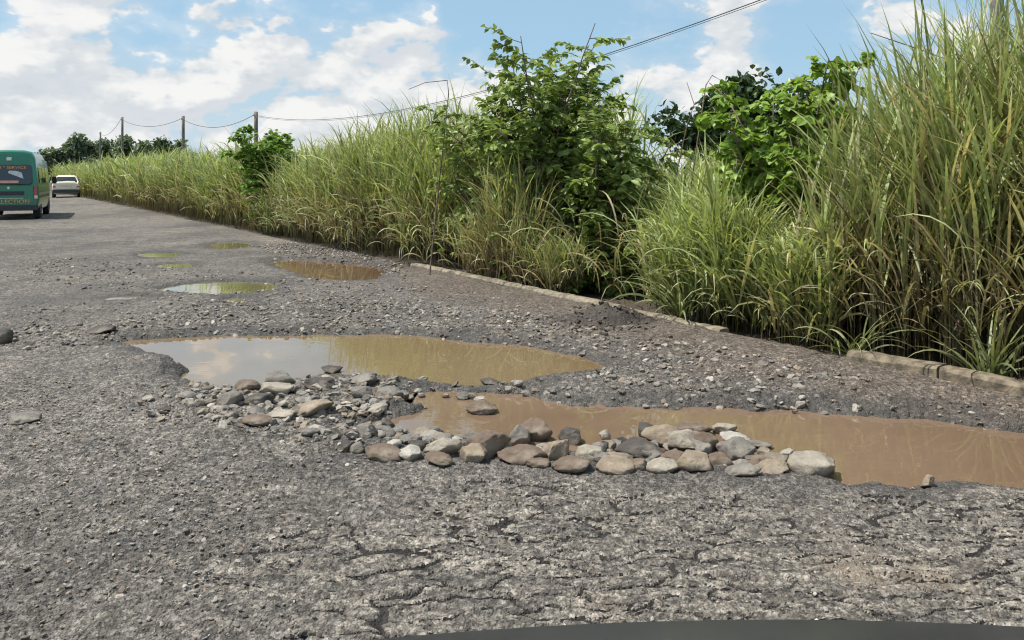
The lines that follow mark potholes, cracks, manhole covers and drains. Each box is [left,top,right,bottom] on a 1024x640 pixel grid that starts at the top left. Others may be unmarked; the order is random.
pothole [199,240,263,250]
pothole [326,376,1024,500]
pothole [145,261,202,269]
pothole [125,250,189,258]
crack [197,478,1024,640]
pothole [254,254,404,282]
pothole [77,322,643,387]
pothole [141,276,292,295]
